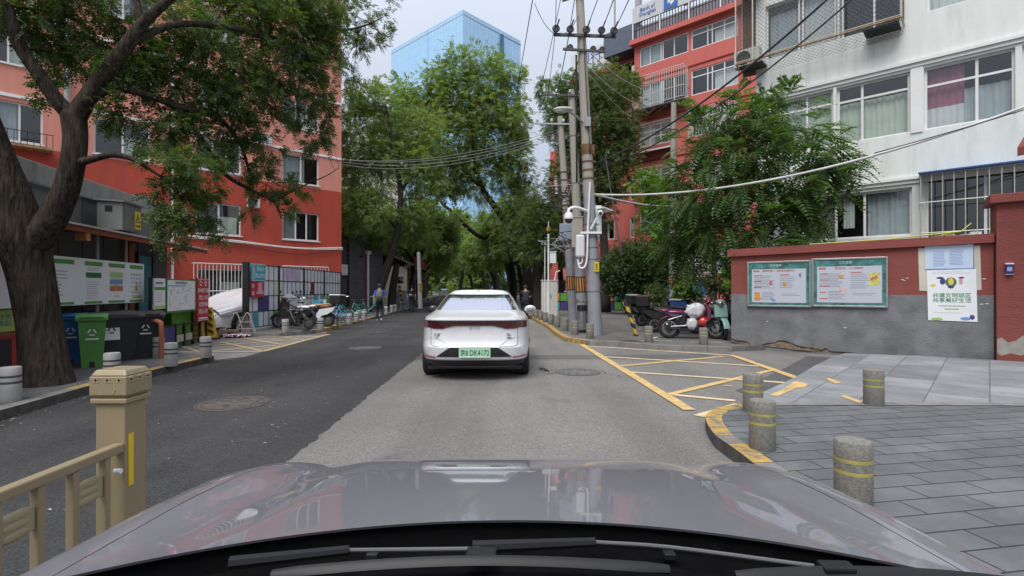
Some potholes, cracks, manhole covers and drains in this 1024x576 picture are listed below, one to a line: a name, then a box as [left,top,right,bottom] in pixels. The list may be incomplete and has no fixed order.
manhole cover [193,396,271,412]
manhole cover [555,368,601,376]
